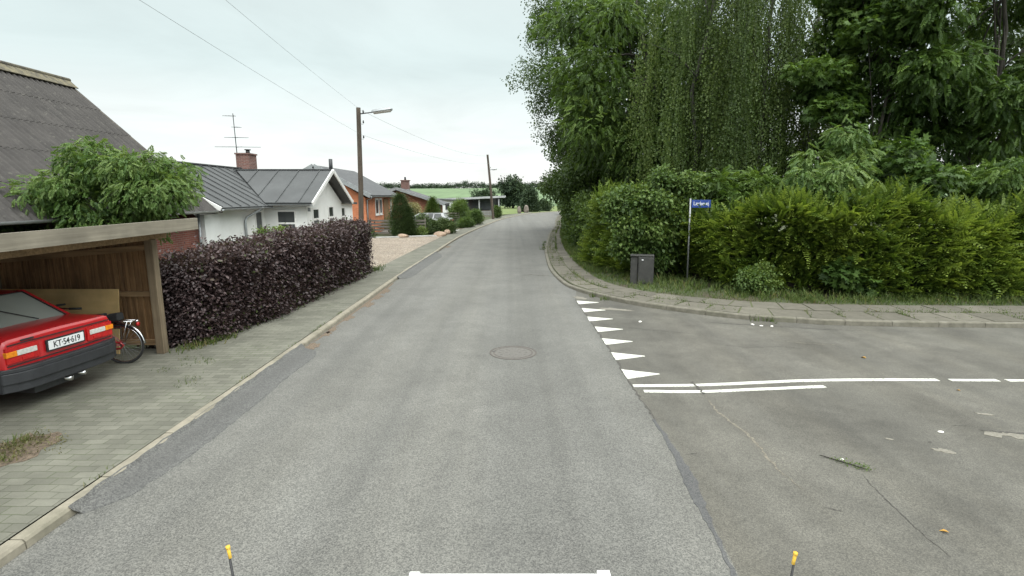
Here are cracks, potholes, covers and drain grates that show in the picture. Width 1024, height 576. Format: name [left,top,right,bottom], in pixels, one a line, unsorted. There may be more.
manhole cover [490,346,537,360]
crack [863,475,948,555]
crack [691,381,803,490]
